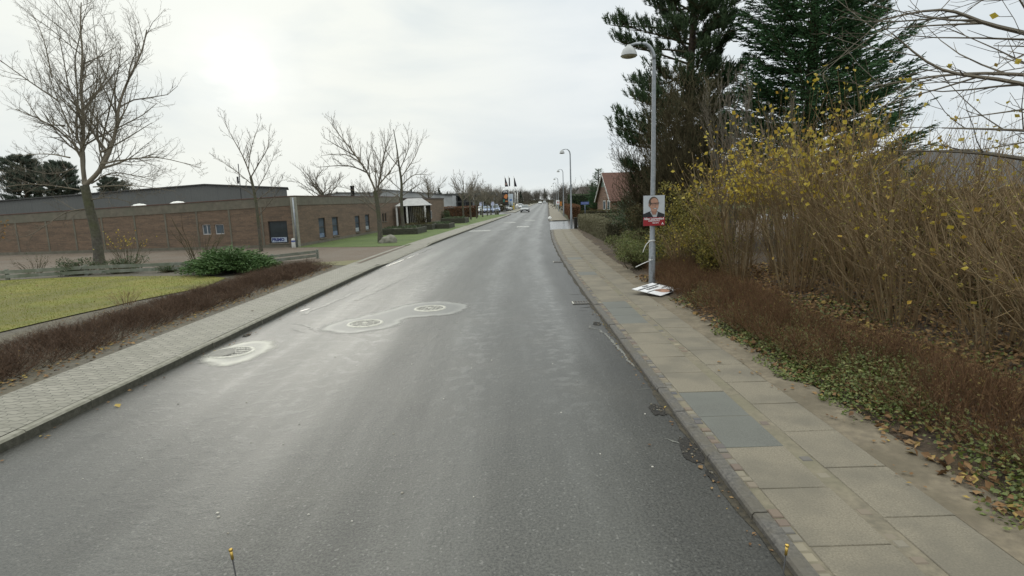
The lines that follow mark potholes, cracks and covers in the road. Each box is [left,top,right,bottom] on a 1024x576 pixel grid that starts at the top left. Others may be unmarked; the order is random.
manhole cover [208,346,256,358]
pothole [678,436,706,463]
pothole [648,403,667,416]
manhole cover [347,319,383,328]
